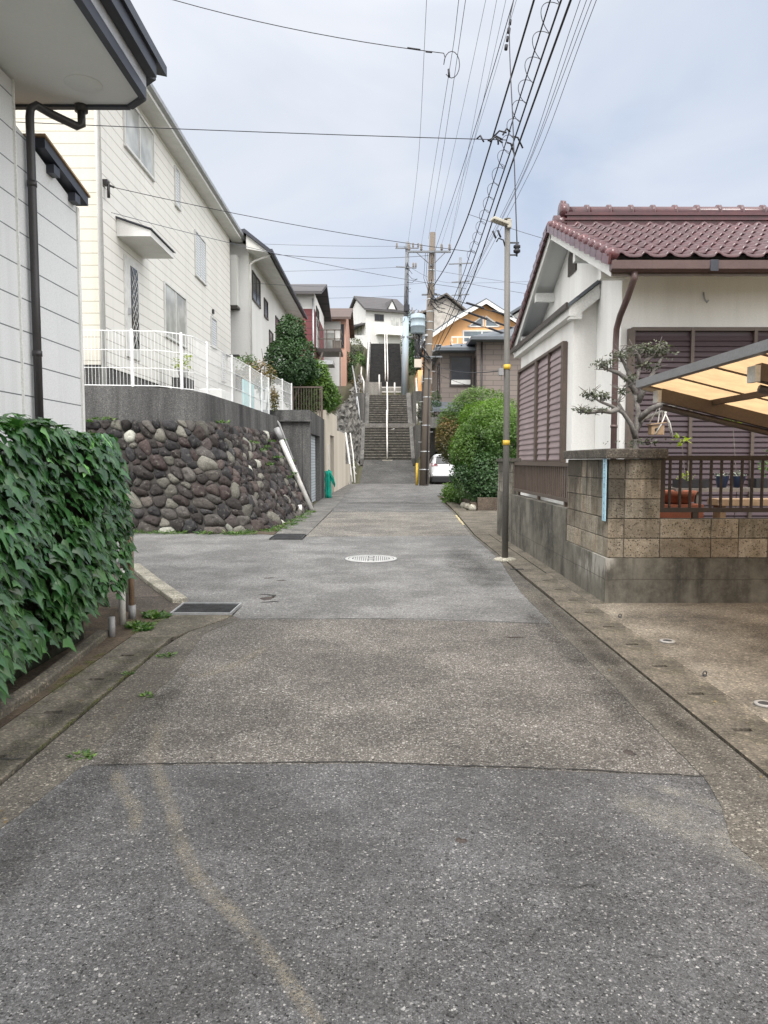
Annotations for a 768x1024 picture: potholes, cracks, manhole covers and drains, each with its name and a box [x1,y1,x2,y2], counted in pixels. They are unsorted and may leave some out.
manhole cover [344,555,398,563]
drain grate [170,602,242,615]
